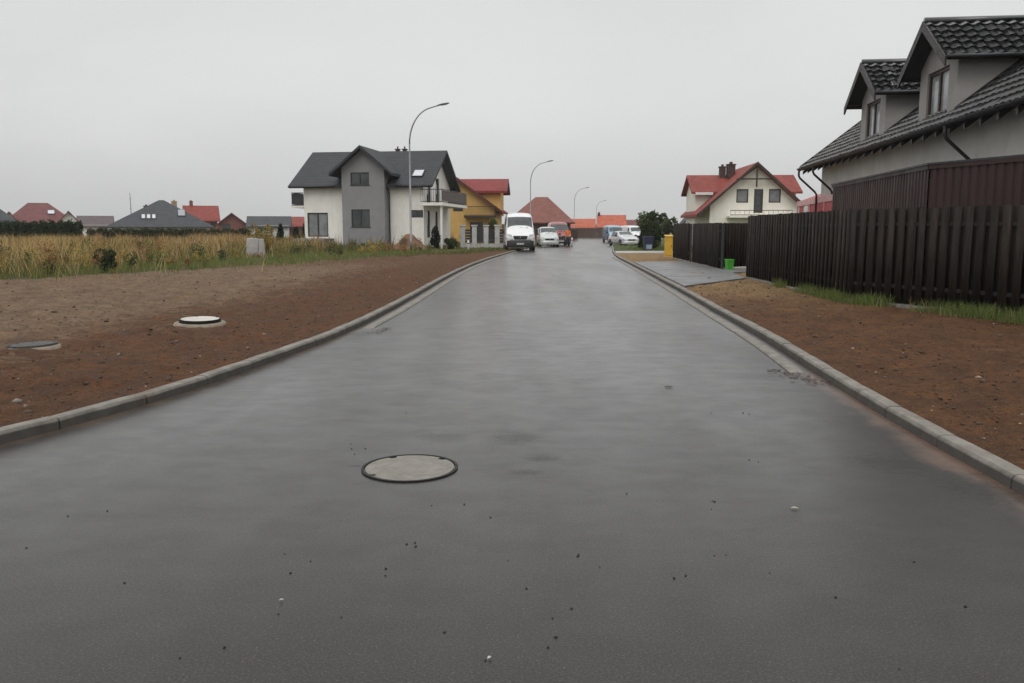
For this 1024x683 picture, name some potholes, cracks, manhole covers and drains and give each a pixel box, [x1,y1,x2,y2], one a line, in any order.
manhole cover [173,316,226,328]
manhole cover [361,454,458,483]
manhole cover [6,341,61,350]
